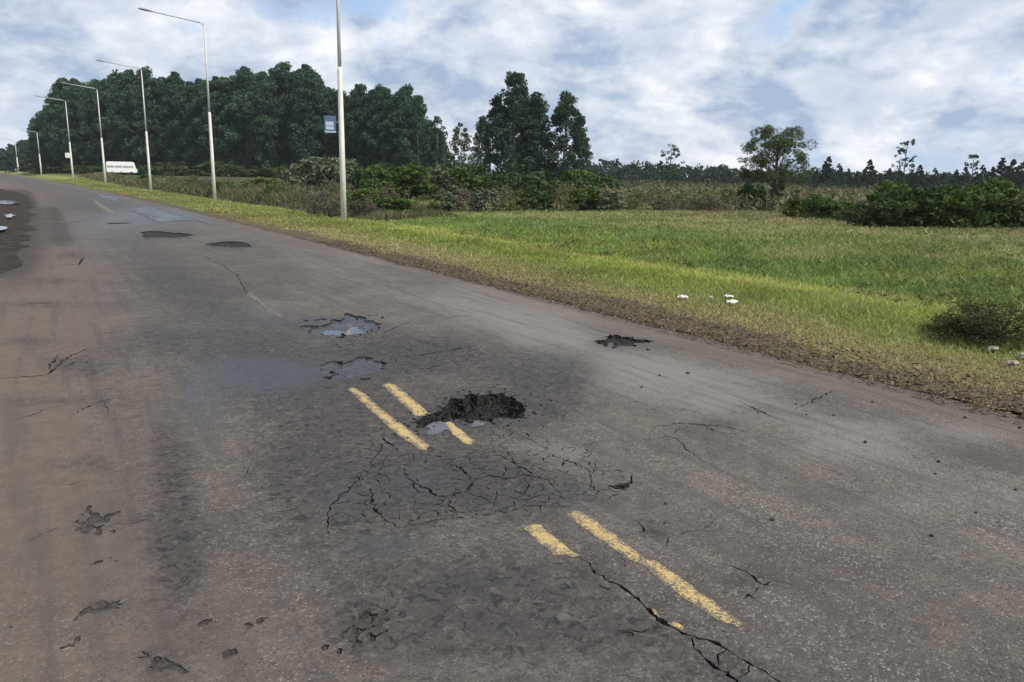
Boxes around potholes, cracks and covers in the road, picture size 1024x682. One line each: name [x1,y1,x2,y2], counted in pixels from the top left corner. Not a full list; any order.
pothole [321,609,401,654]
pothole [594,334,654,350]
crack [326,423,634,535]
pothole [319,356,386,380]
crack [1,332,113,379]
pothole [73,600,125,621]
pothole [381,386,555,438]
crack [656,389,856,472]
pothole [299,313,384,337]
pothole [73,505,121,536]
